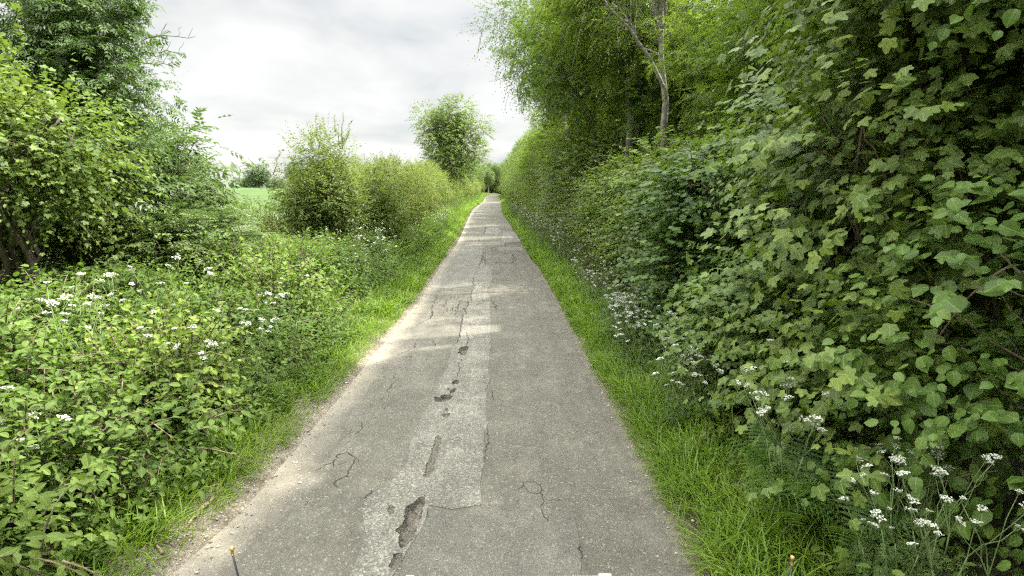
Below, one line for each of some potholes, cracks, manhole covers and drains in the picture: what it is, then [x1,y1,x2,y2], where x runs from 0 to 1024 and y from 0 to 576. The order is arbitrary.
pothole [423,436,442,478]
crack [317,423,373,498]
crack [518,481,560,518]
pothole [395,496,425,549]
crack [381,205,517,409]
